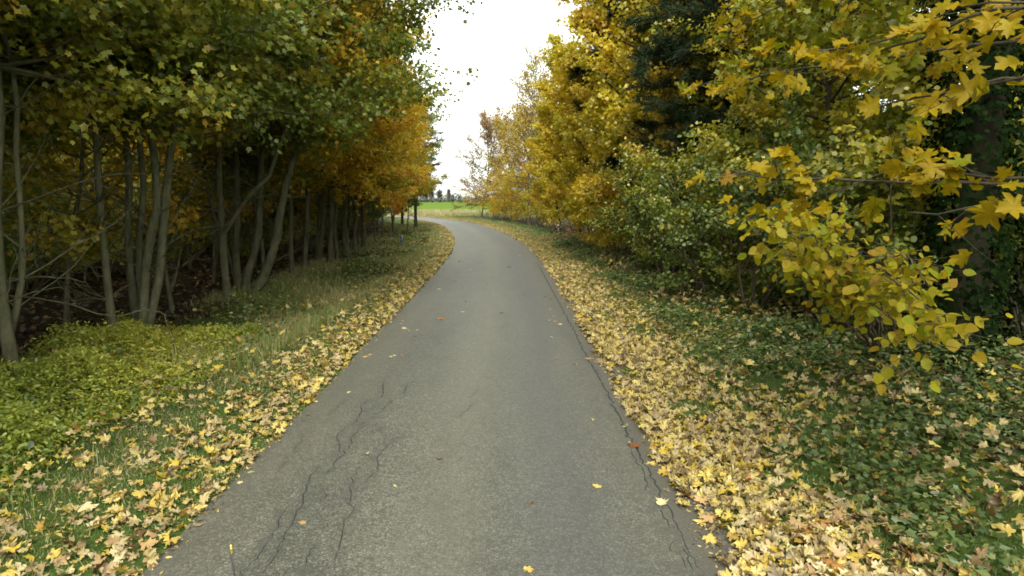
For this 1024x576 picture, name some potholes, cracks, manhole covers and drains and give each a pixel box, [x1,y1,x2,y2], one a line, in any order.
crack [539,266,704,576]
crack [240,383,408,576]
